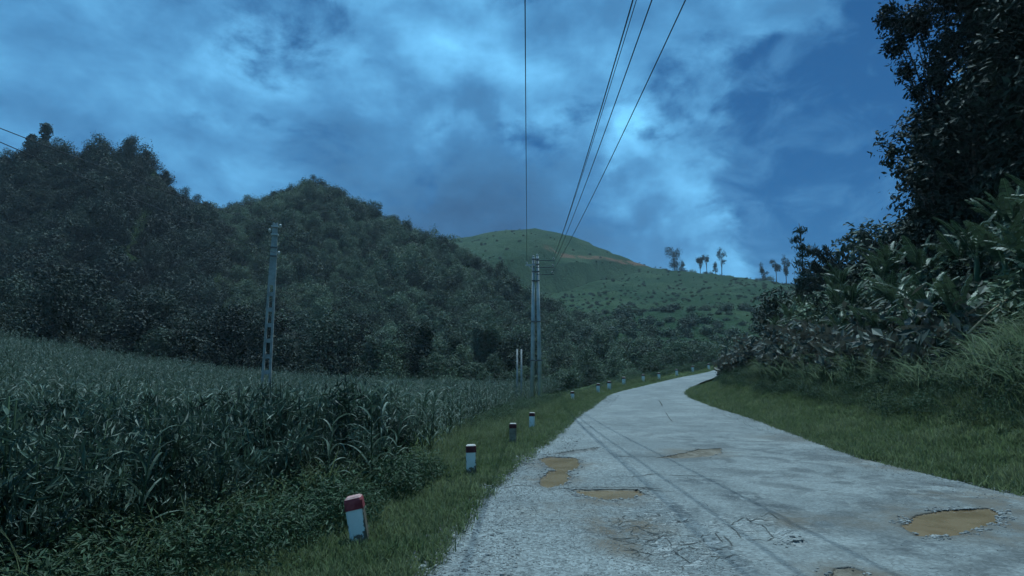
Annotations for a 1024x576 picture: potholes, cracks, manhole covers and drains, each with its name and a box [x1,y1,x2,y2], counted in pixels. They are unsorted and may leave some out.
pothole [814,567,872,576]
crack [605,512,779,570]
pothole [660,448,722,458]
pothole [888,506,1017,541]
pothole [563,487,653,502]
pothole [533,455,587,489]
